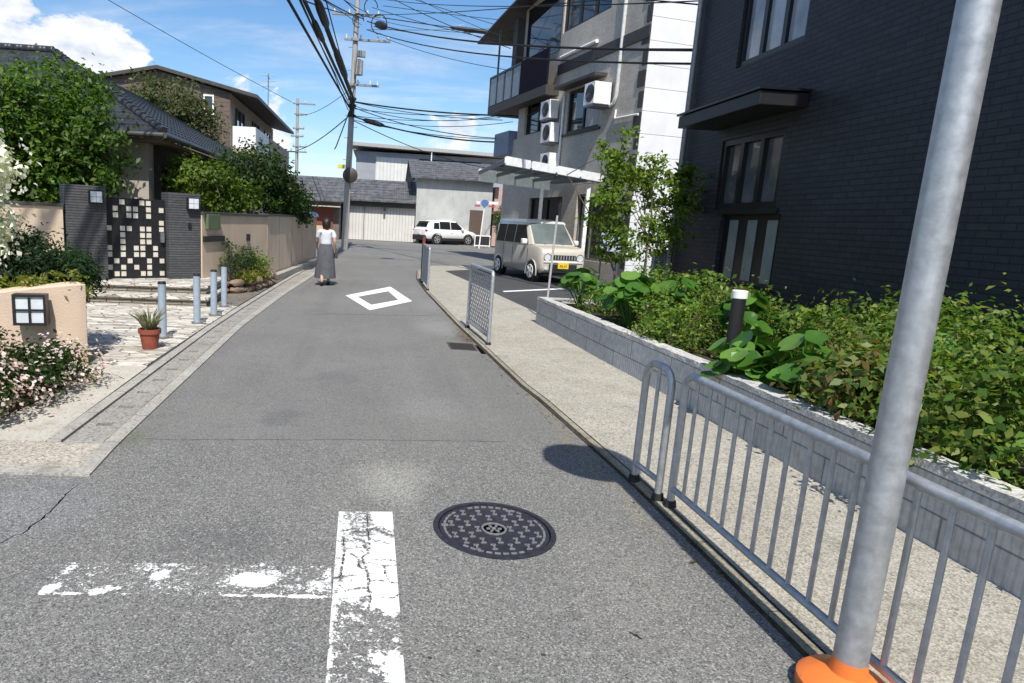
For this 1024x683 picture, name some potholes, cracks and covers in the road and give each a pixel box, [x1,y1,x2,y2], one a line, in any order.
manhole cover [433,502,556,560]
crack [0,486,76,544]
crack [324,516,398,608]
drain grate [447,342,478,351]
